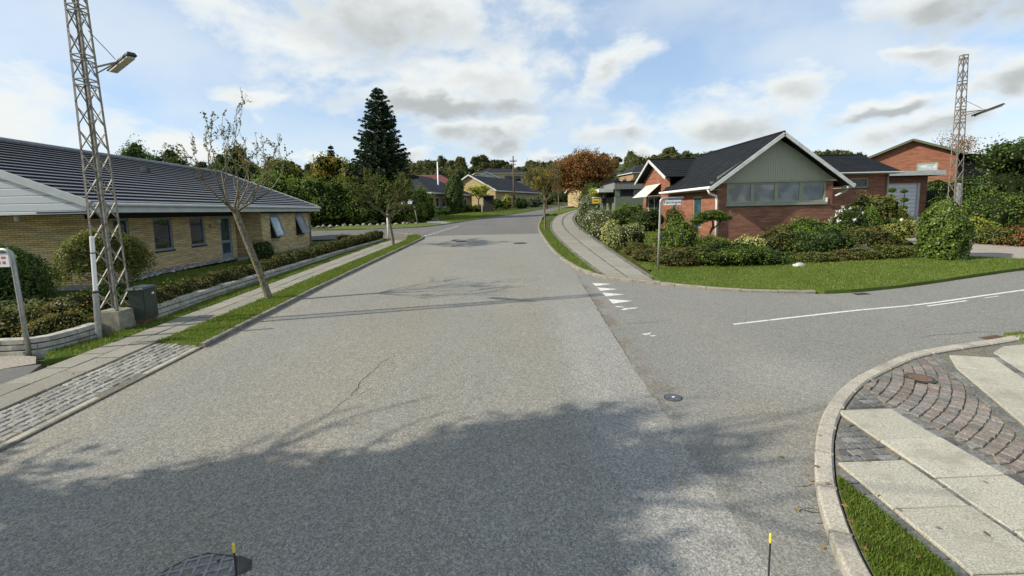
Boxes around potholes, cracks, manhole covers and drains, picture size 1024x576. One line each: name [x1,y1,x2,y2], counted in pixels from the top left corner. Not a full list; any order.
manhole cover [664,394,683,402]
manhole cover [904,373,937,383]
